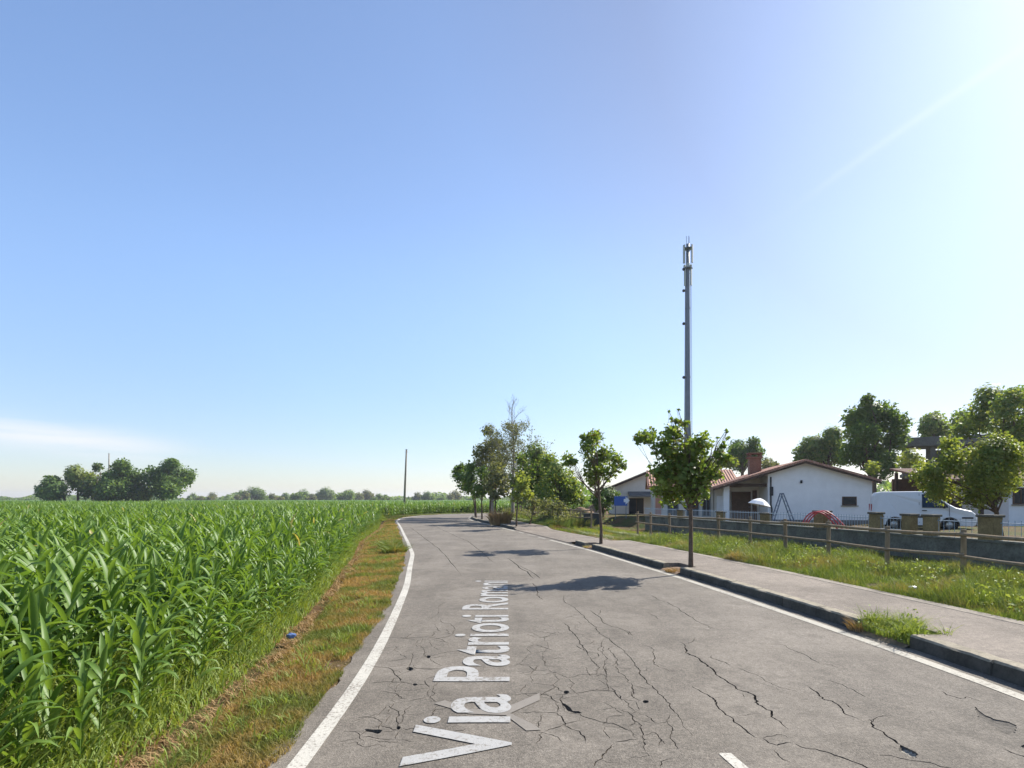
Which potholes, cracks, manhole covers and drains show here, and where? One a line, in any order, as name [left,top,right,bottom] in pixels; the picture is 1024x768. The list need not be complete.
crack [341,603,465,747]
crack [649,594,948,768]
pothole [899,745,918,758]
crack [512,598,692,767]
